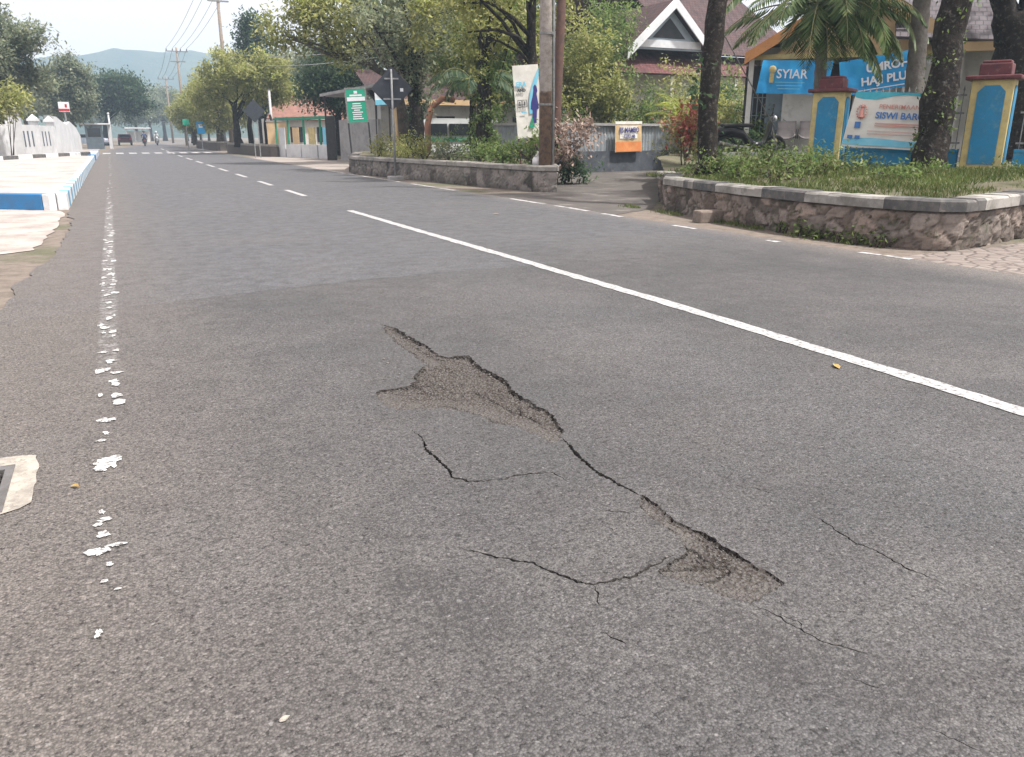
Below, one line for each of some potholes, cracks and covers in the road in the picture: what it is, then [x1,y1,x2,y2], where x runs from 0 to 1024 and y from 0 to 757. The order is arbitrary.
crack [457,547,685,644]
crack [753,605,879,688]
pothole [639,495,785,603]
crack [412,430,642,513]
crack [814,516,946,585]
pothole [375,324,564,443]
